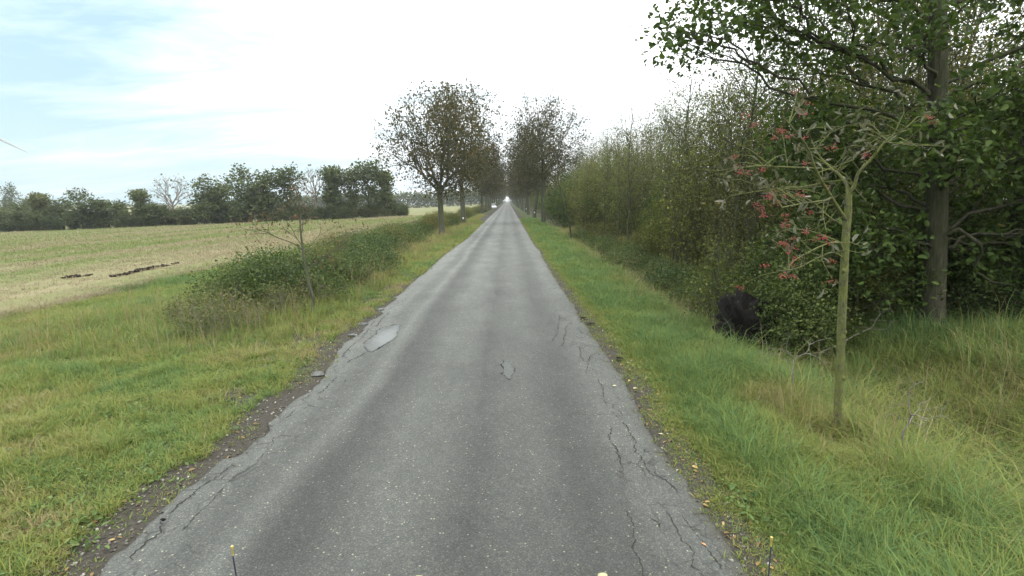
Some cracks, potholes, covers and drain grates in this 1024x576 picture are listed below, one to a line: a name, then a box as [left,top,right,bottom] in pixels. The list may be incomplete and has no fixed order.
crack [290,313,394,415]
crack [130,437,274,560]
pothole [502,361,514,379]
crack [626,511,722,576]
crack [552,316,678,492]
pothole [364,324,400,352]
